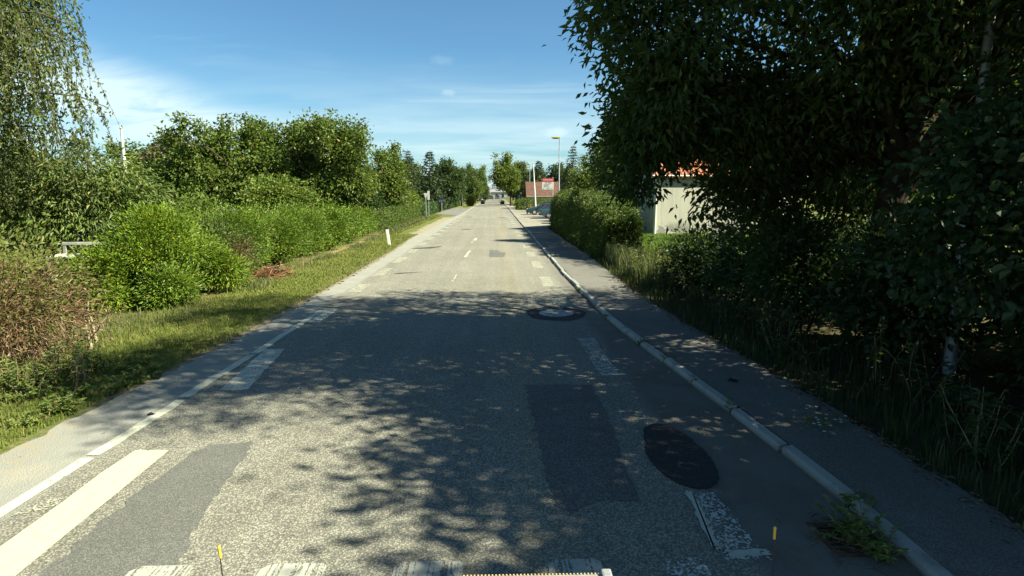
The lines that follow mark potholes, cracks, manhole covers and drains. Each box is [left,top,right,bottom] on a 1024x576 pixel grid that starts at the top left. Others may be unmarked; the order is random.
manhole cover [526,306,586,321]
